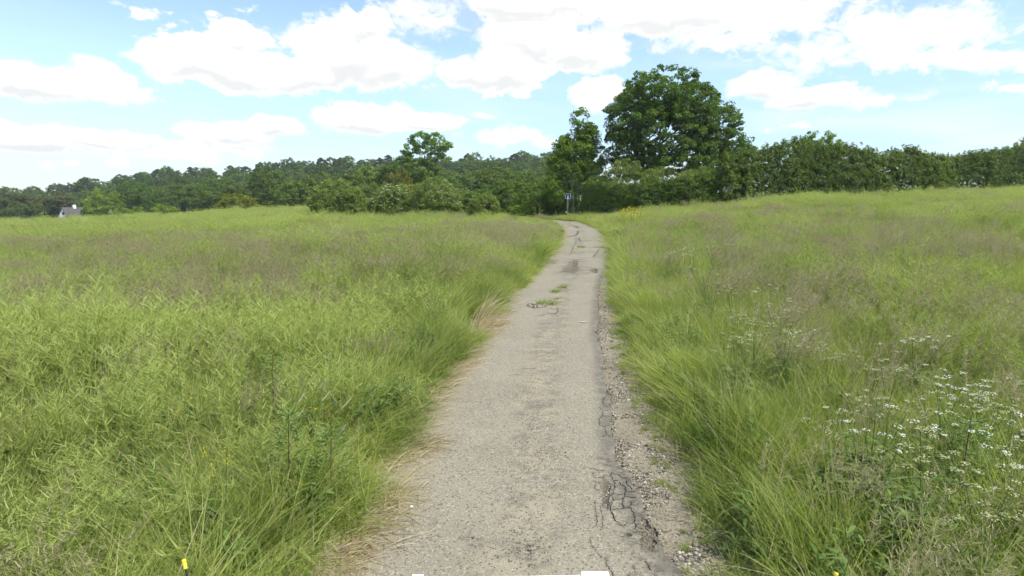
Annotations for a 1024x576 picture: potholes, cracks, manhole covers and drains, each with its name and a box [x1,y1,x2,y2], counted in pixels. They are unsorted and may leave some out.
crack [590,468,638,575]
